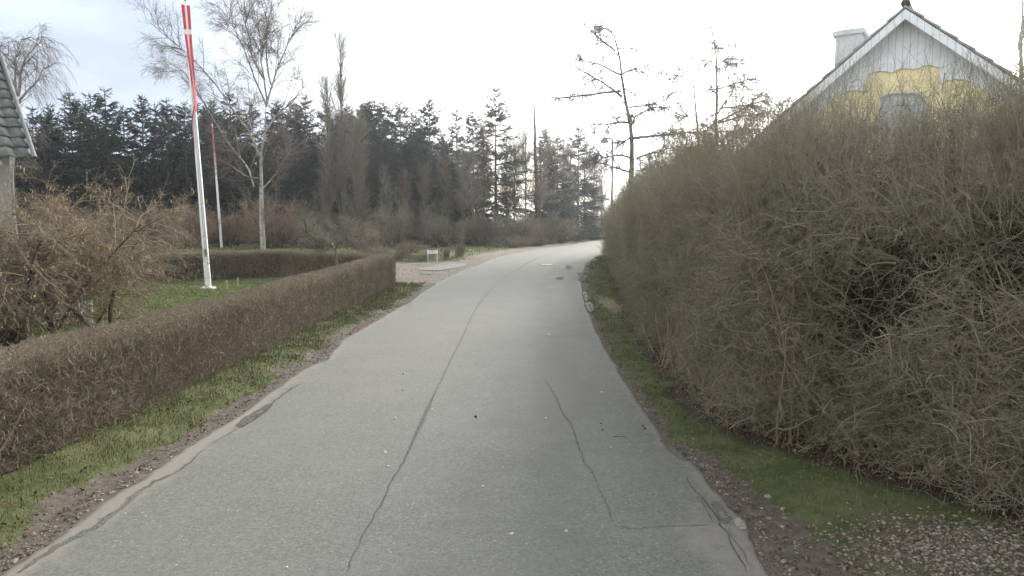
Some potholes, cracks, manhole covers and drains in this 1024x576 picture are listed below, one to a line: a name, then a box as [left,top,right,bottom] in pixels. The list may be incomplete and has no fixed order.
crack [549,386,751,570]
